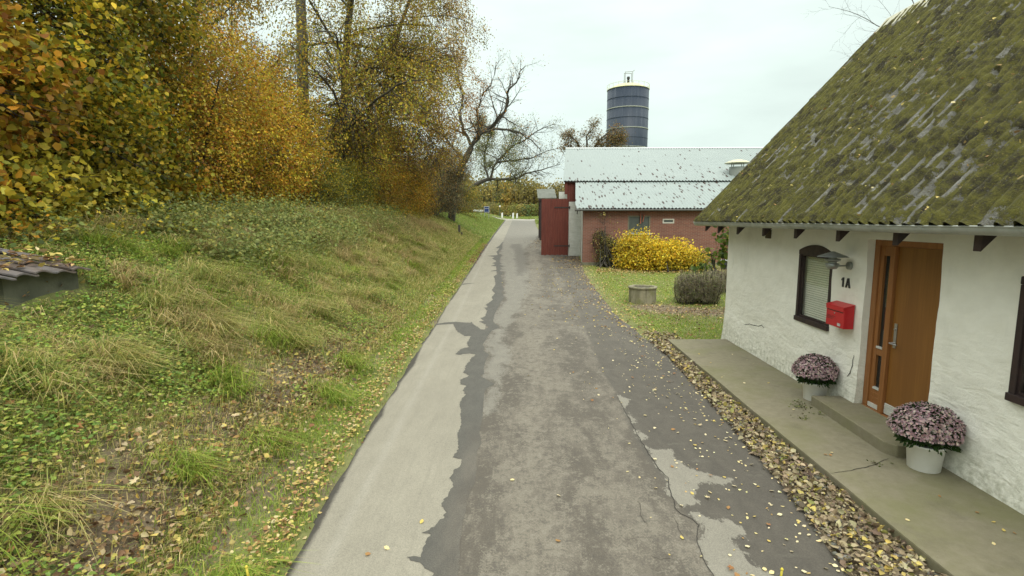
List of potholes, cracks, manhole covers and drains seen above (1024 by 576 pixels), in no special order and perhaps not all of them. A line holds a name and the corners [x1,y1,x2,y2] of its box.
crack [616,395,714,575]
